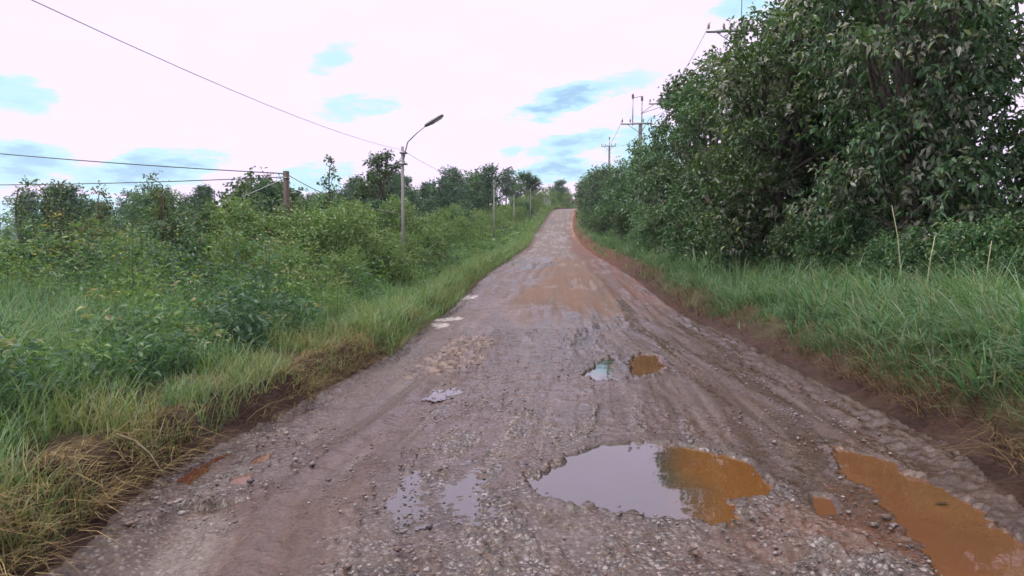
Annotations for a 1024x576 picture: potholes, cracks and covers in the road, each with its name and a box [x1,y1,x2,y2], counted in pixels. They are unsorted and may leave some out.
pothole [522,439,787,529]
pothole [581,352,629,381]
pothole [221,470,258,486]
pothole [172,451,248,489]
pothole [823,442,1024,576]
pothole [807,491,845,516]
pothole [244,449,278,466]
pothole [626,351,669,377]
